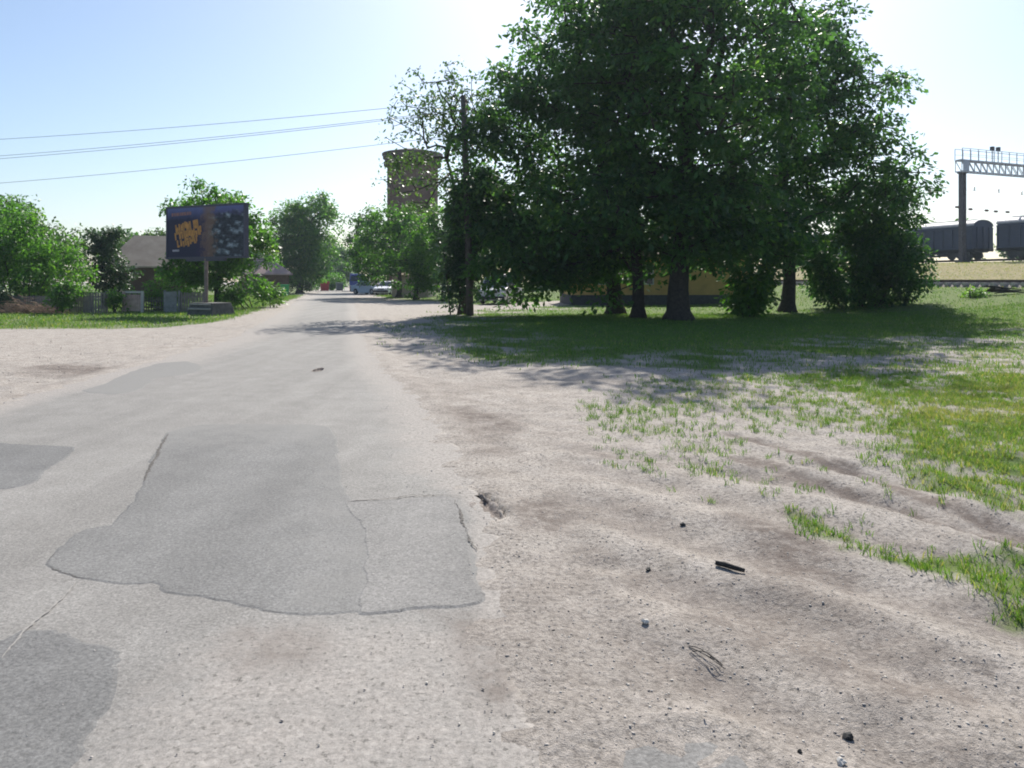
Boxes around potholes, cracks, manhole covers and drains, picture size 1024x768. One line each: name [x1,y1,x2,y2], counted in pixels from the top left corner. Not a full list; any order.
crack [143,434,169,481]
pothole [469,493,505,520]
crack [2,553,88,657]
